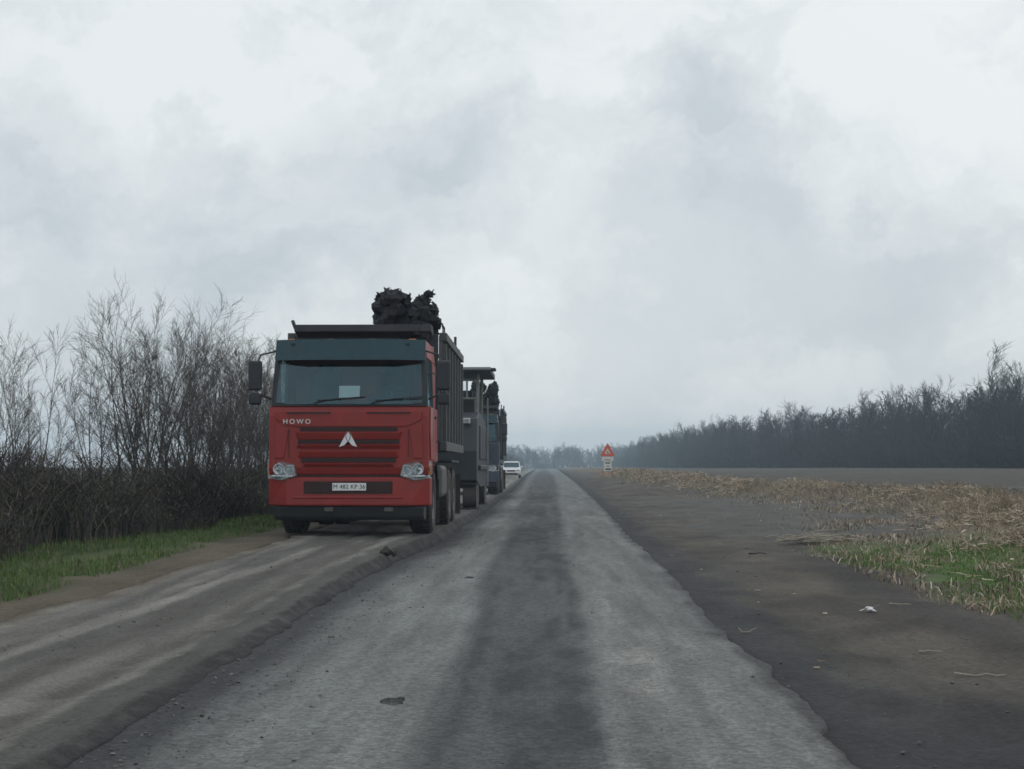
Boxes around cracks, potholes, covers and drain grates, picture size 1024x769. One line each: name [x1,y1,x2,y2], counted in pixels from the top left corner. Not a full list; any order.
pothole [379,697,405,706]
